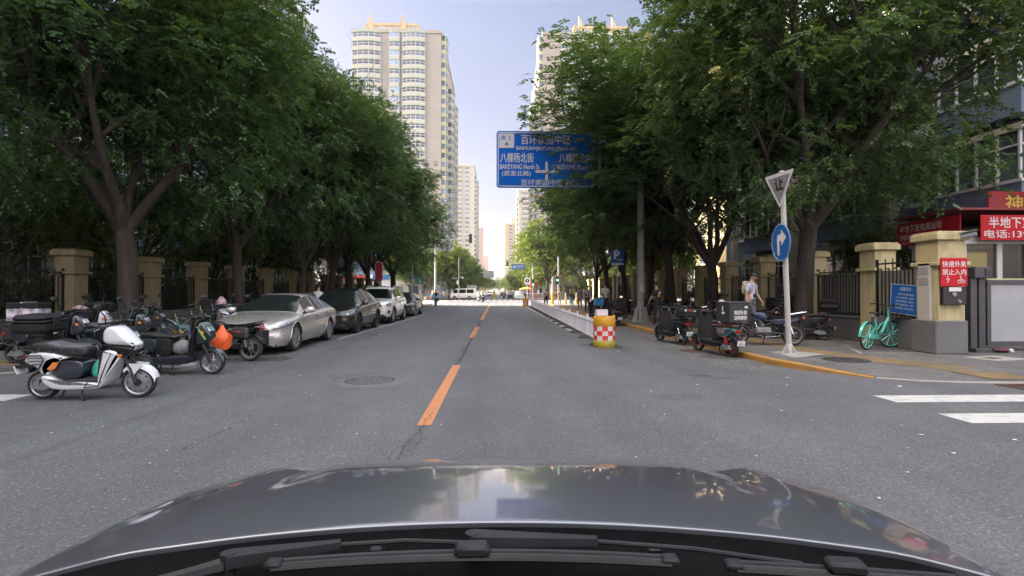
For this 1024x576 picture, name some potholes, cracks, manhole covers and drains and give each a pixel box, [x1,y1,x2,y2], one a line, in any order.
manhole cover [332,374,408,388]
